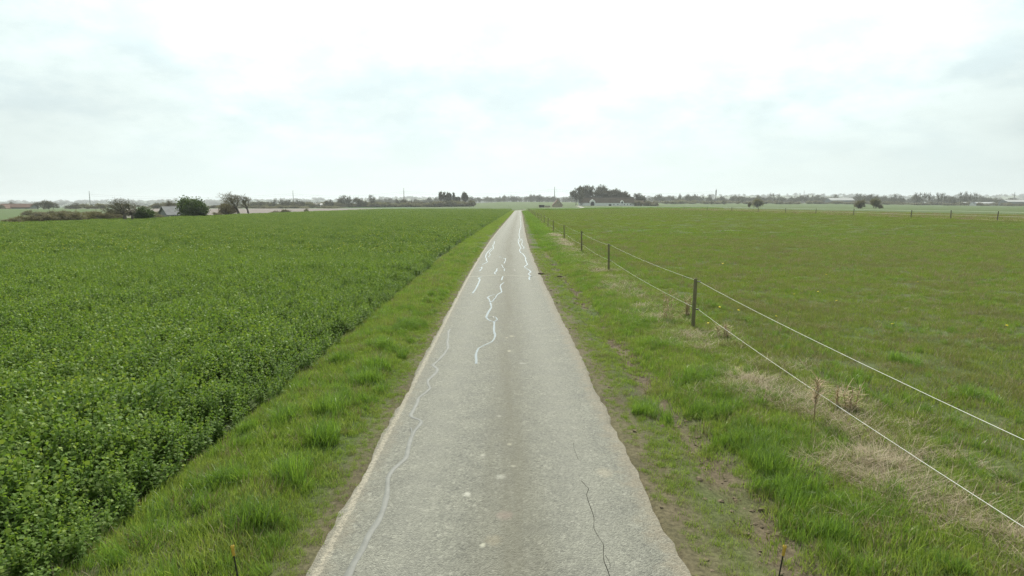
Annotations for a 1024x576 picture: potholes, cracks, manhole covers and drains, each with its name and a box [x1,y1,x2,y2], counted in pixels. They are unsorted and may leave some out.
crack [583,483,610,576]
